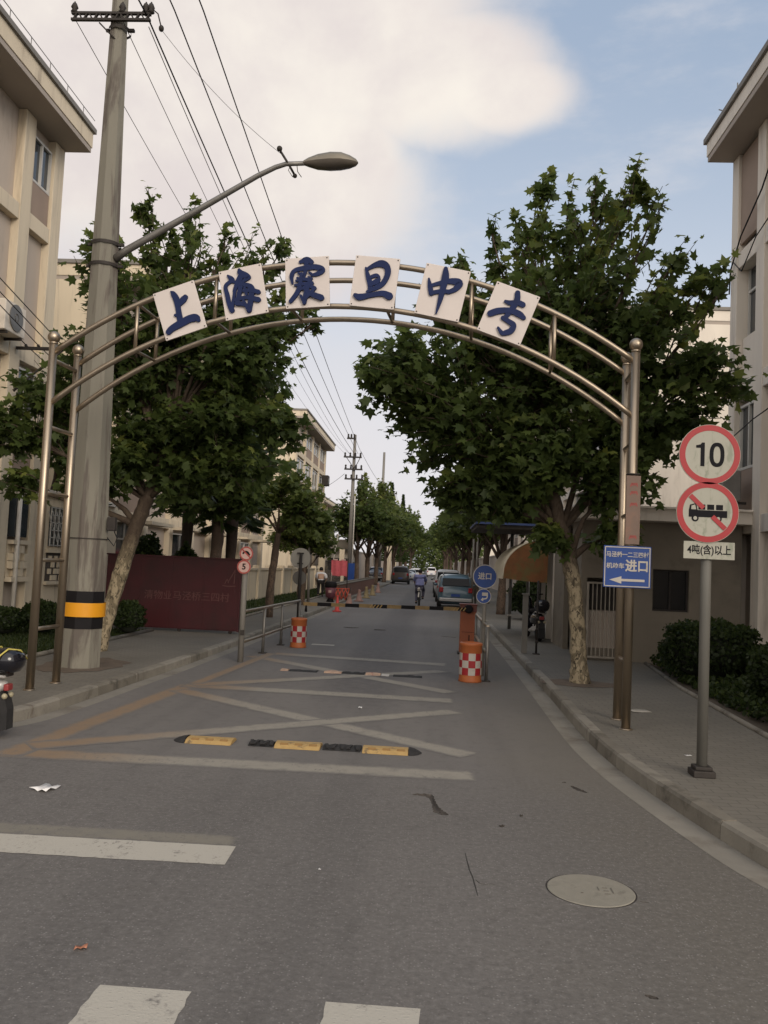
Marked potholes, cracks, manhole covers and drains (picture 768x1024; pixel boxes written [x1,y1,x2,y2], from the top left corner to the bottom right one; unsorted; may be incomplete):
manhole cover [545,874,638,908]
crack [465,853,499,895]
